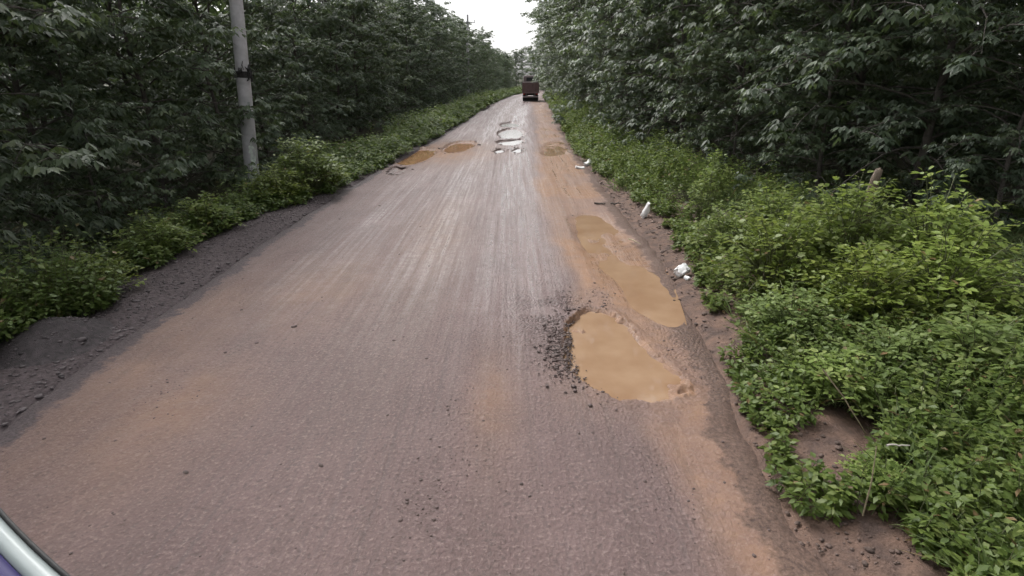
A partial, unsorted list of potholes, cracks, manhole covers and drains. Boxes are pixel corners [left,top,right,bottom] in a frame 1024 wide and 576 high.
pothole [528,300,709,411]
pothole [493,127,529,140]
pothole [492,138,529,146]
pothole [393,146,442,167]
pothole [436,140,481,154]
